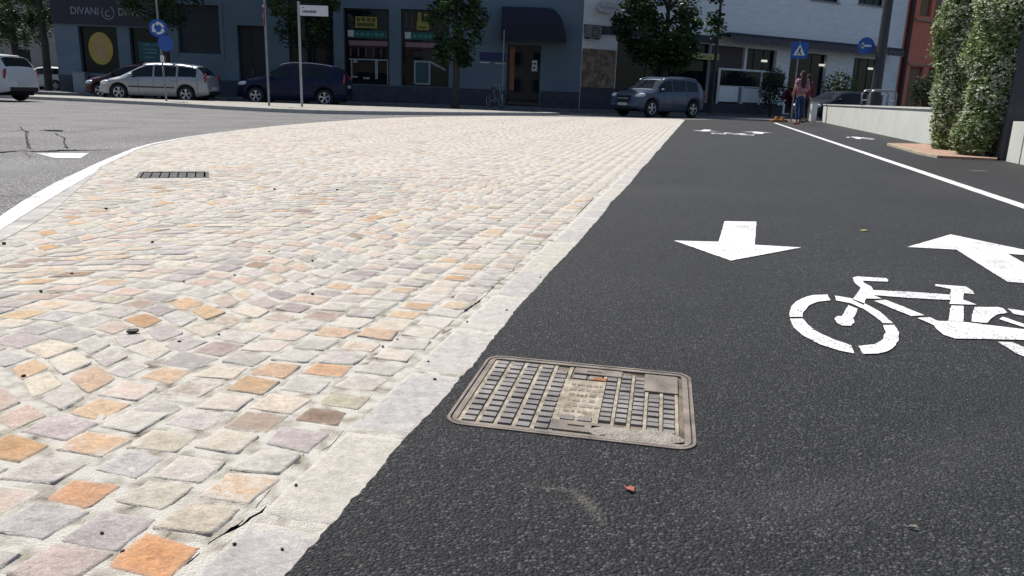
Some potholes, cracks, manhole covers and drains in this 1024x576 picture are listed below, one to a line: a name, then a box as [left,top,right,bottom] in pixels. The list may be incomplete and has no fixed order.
crack [186,490,270,565]
manhole cover [447,356,696,450]
crack [0,127,111,156]
